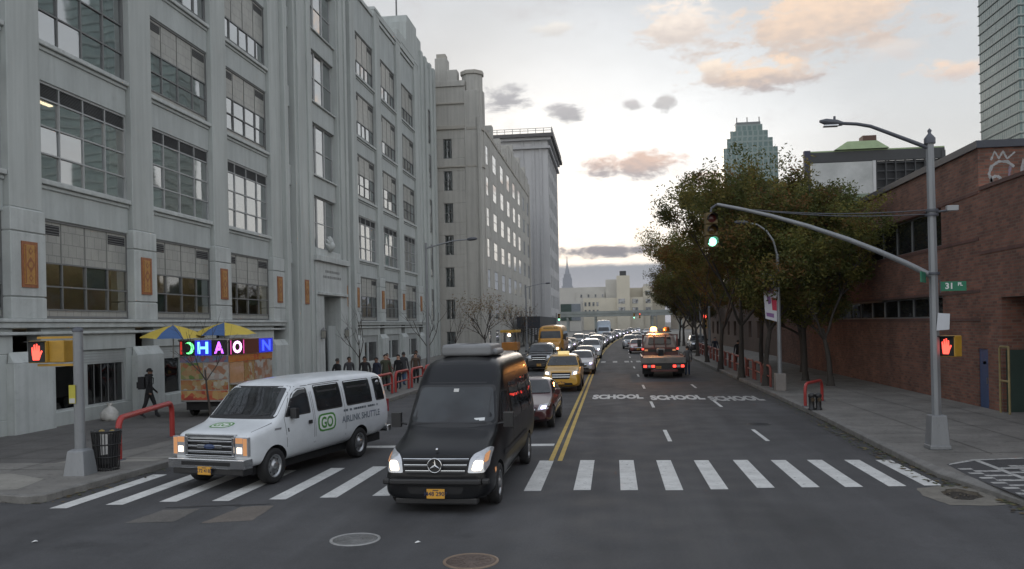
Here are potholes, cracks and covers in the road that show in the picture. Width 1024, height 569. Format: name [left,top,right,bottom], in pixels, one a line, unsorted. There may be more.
manhole cover [329,533,381,546]
manhole cover [443,553,499,569]
